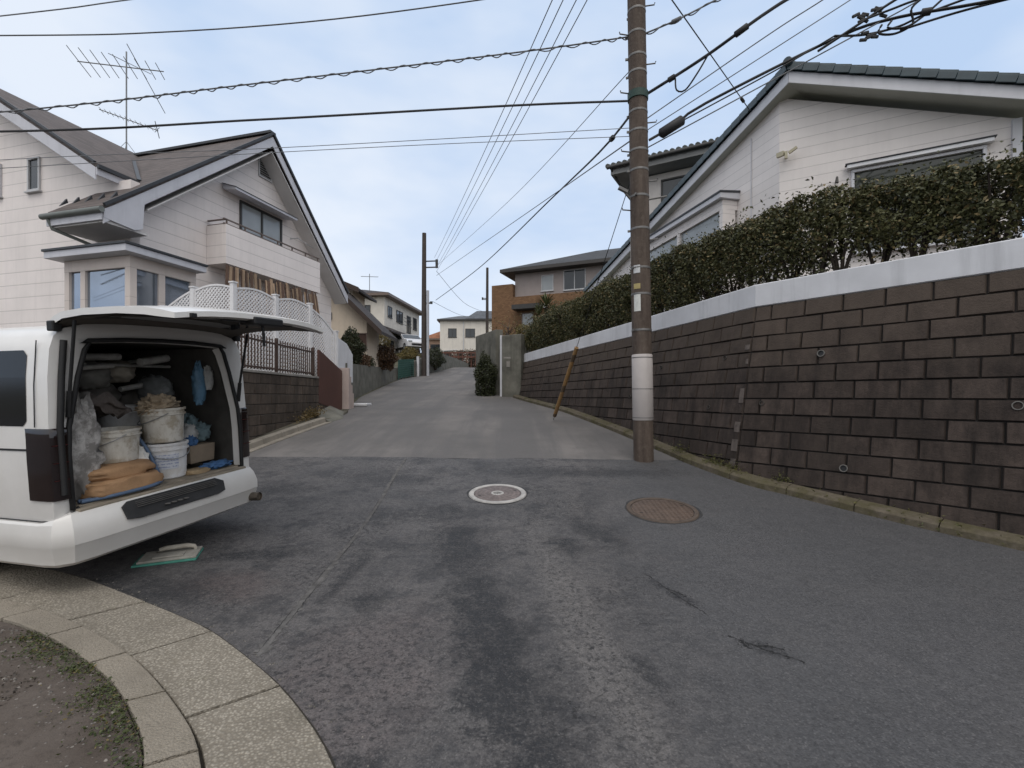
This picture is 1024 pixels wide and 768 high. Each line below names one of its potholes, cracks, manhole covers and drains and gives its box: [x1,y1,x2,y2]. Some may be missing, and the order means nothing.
manhole cover [625,497,703,524]
crack [728,635,805,663]
crack [645,574,706,614]
manhole cover [467,484,528,505]
